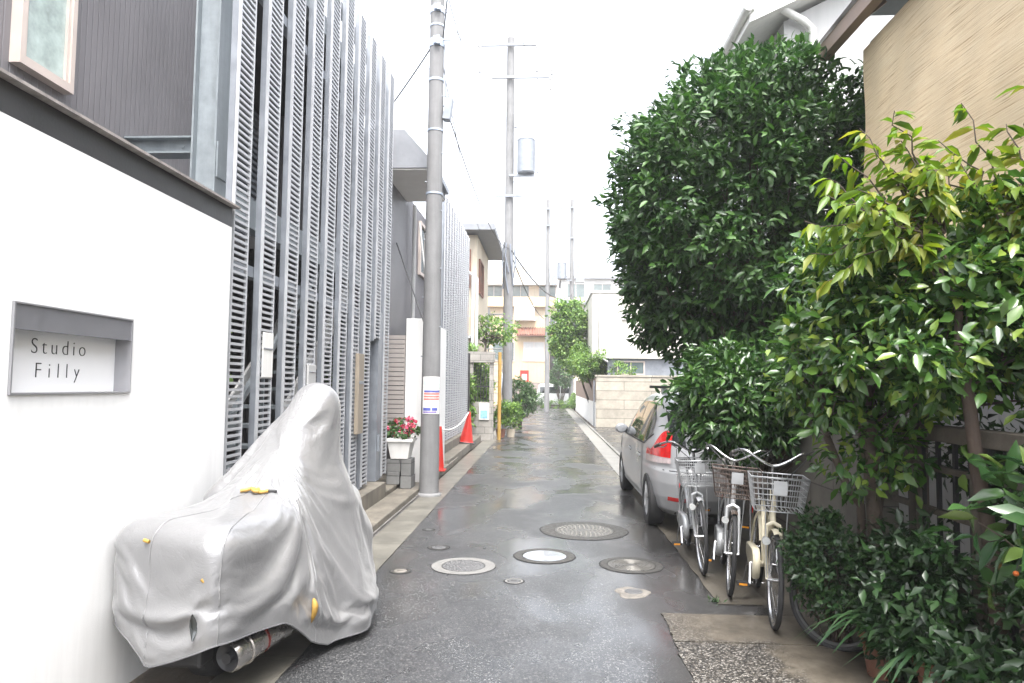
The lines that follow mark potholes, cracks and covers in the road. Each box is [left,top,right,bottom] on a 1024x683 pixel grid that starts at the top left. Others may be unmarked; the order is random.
manhole cover [539,521,629,541]
manhole cover [599,557,665,574]
manhole cover [513,548,576,564]
manhole cover [431,558,496,575]
